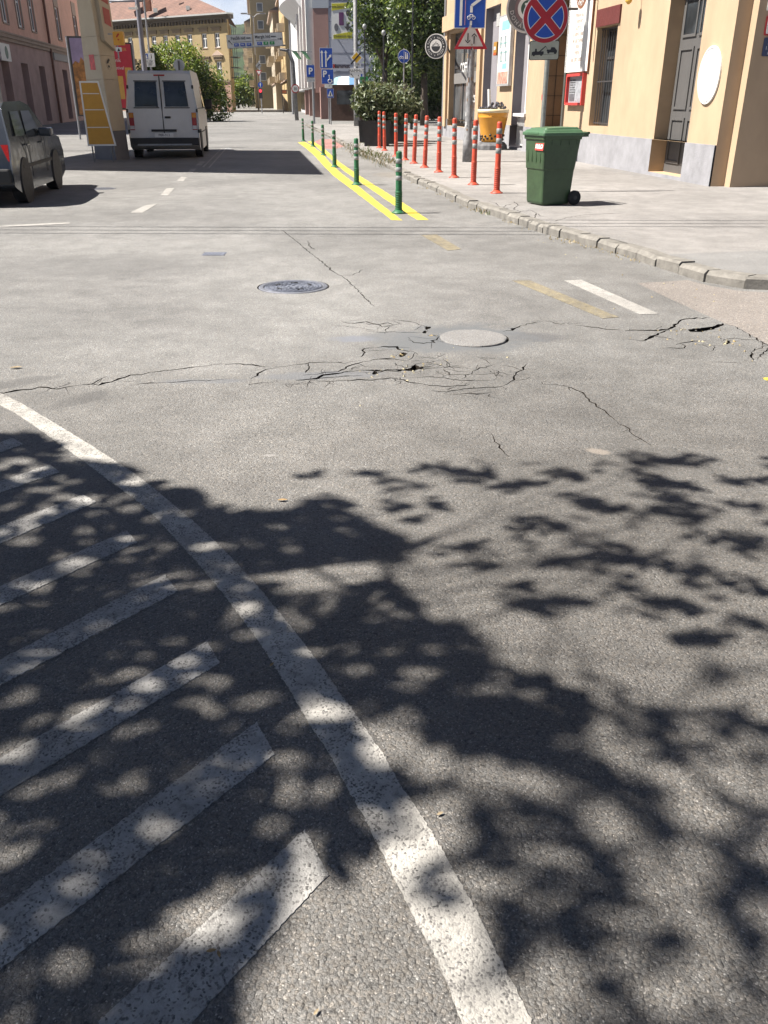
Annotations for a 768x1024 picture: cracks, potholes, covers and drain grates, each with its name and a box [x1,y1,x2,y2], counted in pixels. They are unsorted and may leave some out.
crack [283,231,374,306]
crack [5,320,650,445]
manhole cover [440,330,509,347]
crack [506,317,768,363]
manhole cover [257,280,329,294]
